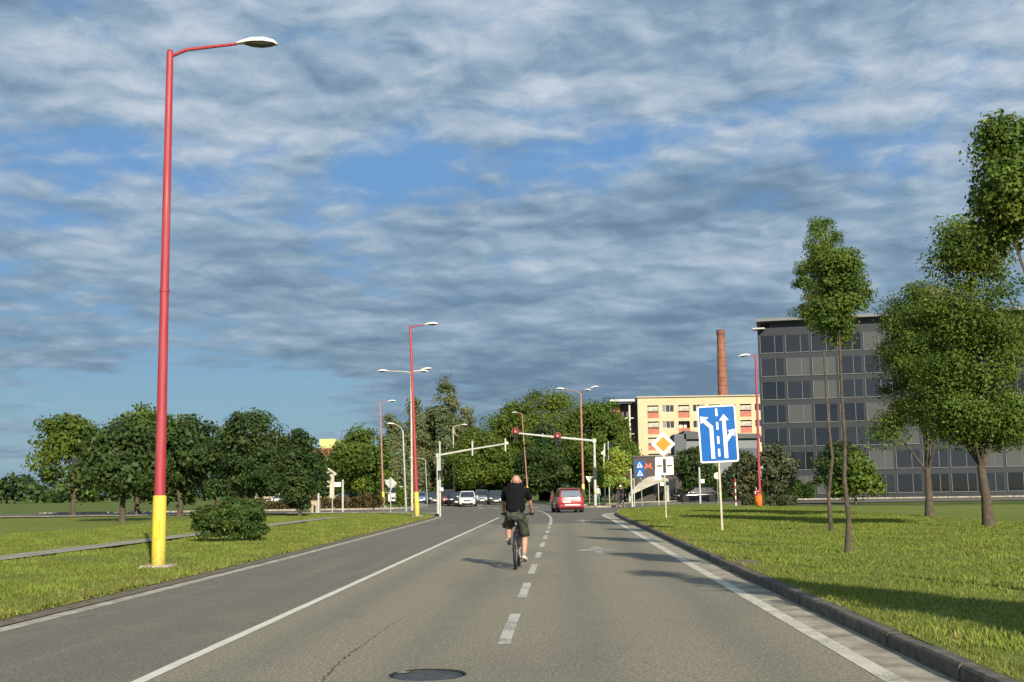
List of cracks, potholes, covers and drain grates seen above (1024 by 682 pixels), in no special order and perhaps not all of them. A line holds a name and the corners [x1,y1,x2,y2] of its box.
manhole cover [389,669,467,681]
crack [322,617,405,682]
